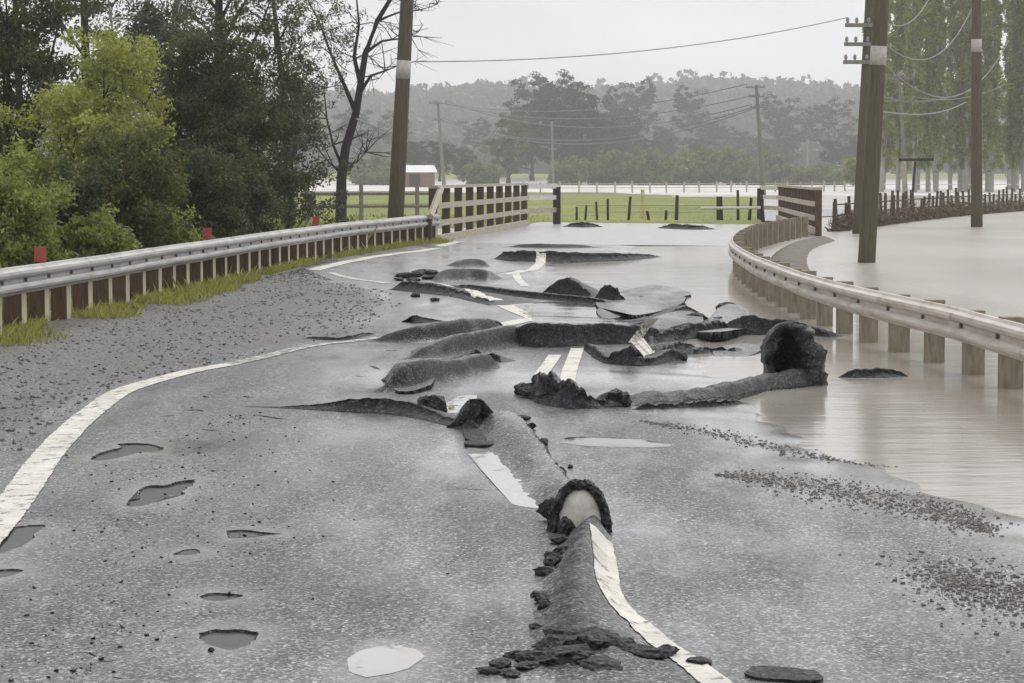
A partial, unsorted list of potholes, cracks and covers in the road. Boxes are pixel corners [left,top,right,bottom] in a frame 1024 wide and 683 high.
pothole [198,629,258,650]
pothole [126,480,195,507]
pothole [0,569,24,578]
pothole [199,593,243,601]
pothole [91,443,164,460]
pothole [226,530,280,539]
pothole [0,525,46,554]
